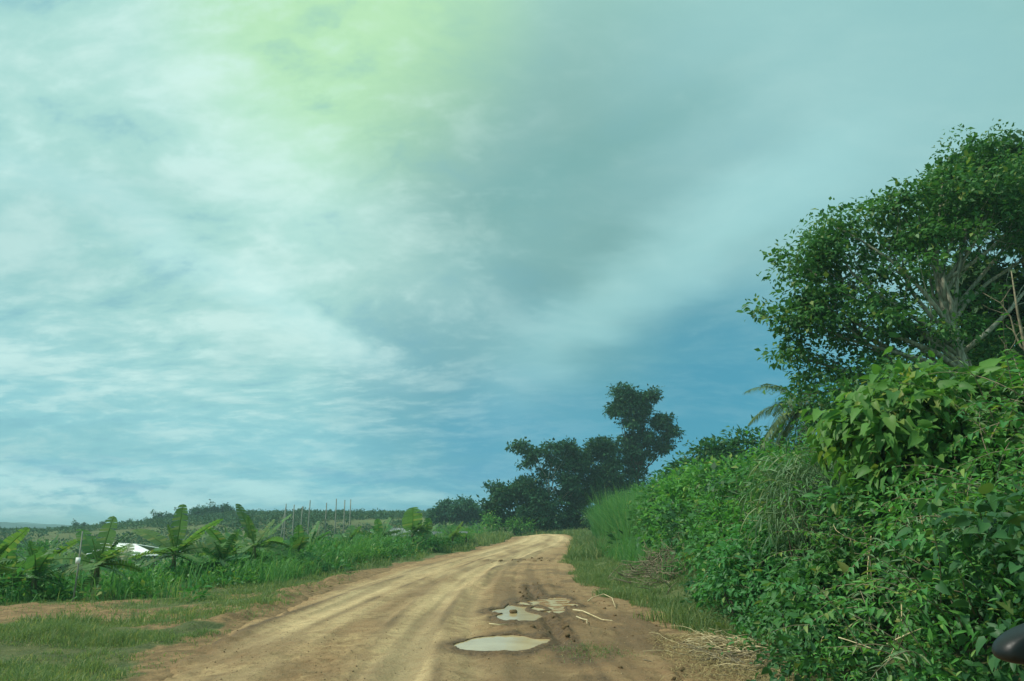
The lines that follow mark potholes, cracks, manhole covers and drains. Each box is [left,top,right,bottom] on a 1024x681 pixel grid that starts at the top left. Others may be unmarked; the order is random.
pothole [443,631,562,655]
pothole [483,599,553,624]
pothole [509,594,586,617]
